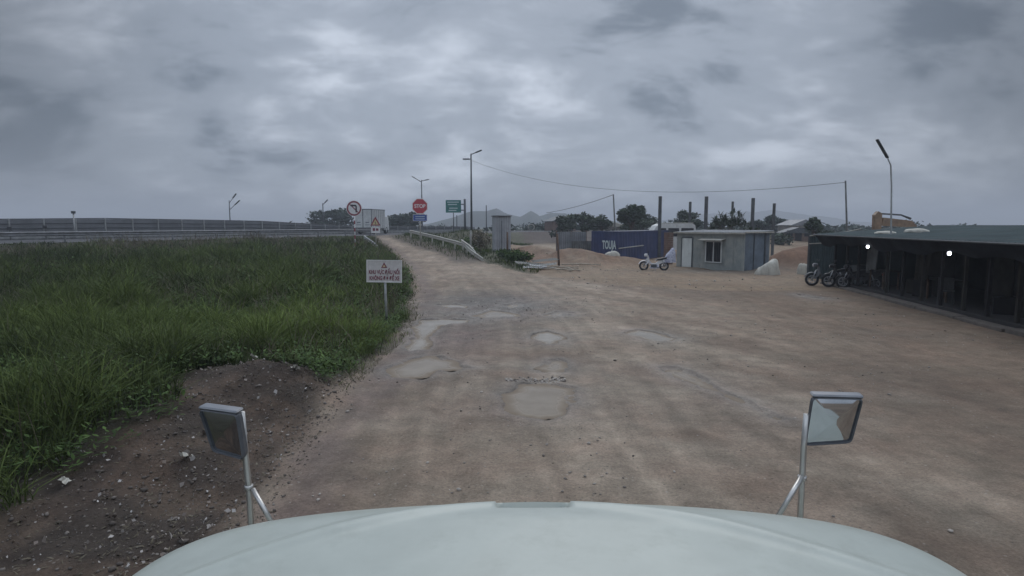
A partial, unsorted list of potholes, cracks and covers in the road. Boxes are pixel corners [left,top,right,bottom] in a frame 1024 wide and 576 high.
pothole [614,328,687,344]
pothole [369,353,487,383]
pothole [484,379,594,425]
pothole [522,356,583,377]
pothole [392,317,478,355]
pothole [517,329,578,347]
pothole [463,309,530,321]
